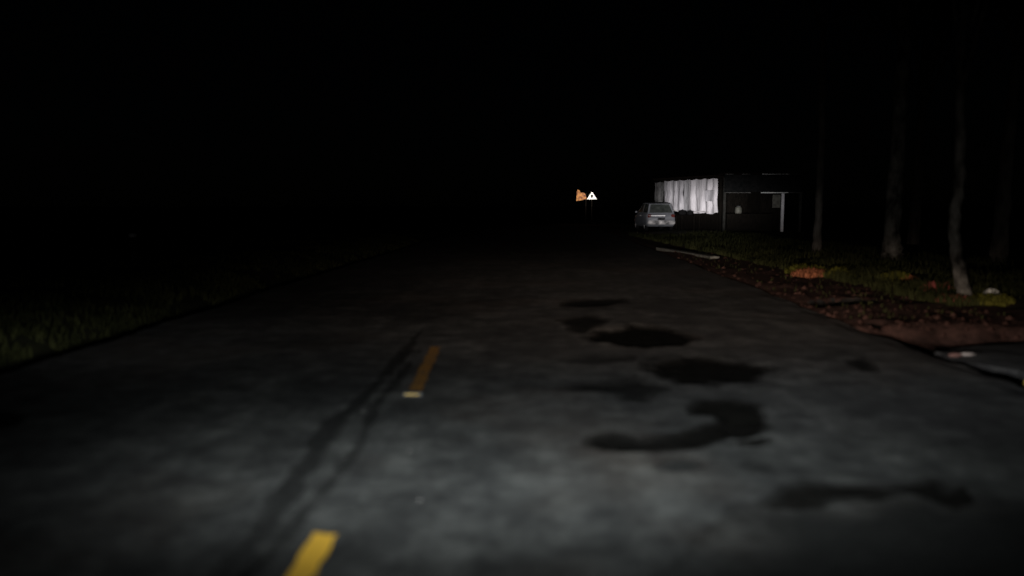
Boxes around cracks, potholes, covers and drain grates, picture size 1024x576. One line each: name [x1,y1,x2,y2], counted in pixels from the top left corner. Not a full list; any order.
pothole [752,477,975,511]
pothole [844,357,881,374]
pothole [578,322,703,348]
pothole [580,398,775,455]
pothole [634,353,779,388]
pothole [558,298,631,308]
pothole [554,315,614,335]
